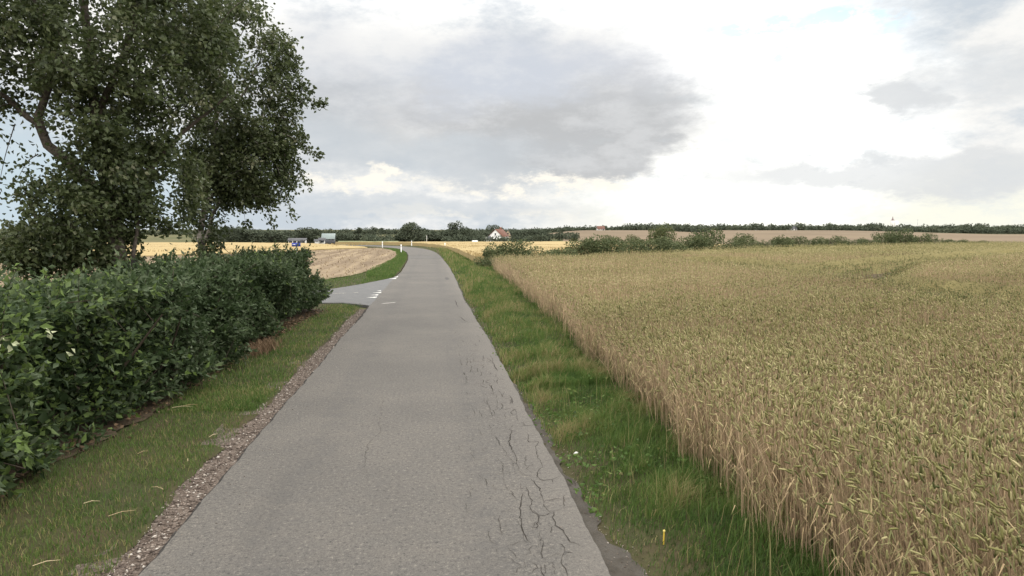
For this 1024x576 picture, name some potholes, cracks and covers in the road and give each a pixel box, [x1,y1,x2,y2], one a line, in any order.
crack [458,407,579,576]
